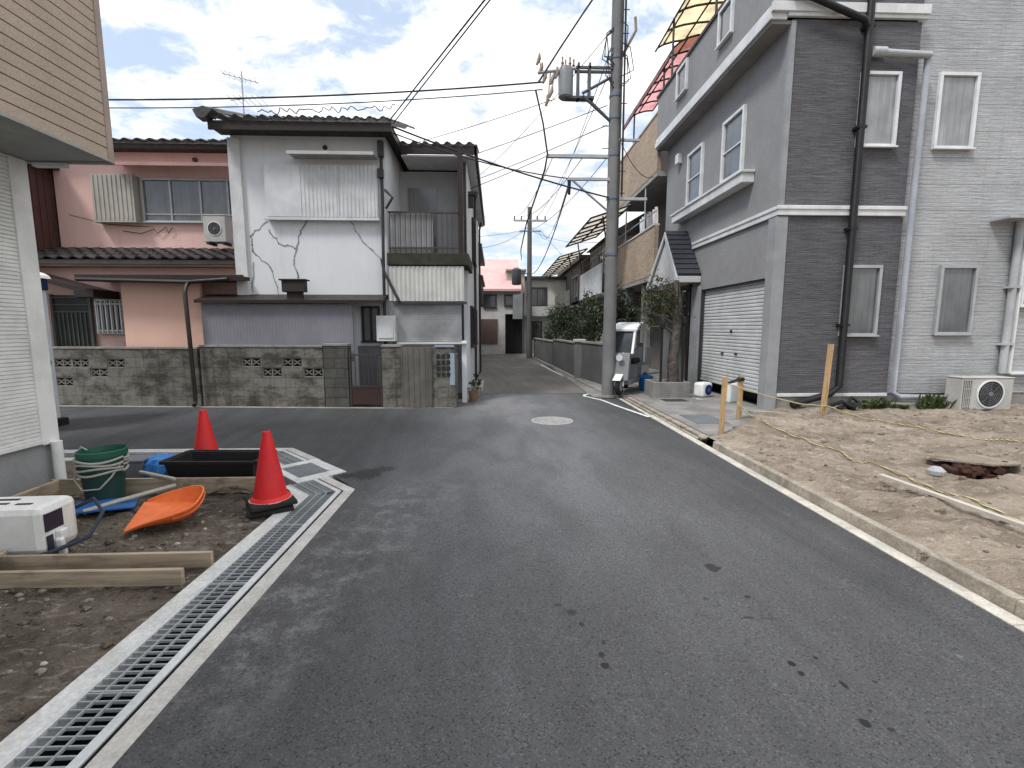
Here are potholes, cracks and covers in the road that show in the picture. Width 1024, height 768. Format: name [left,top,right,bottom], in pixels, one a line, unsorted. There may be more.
manhole cover [531,416,573,425]
